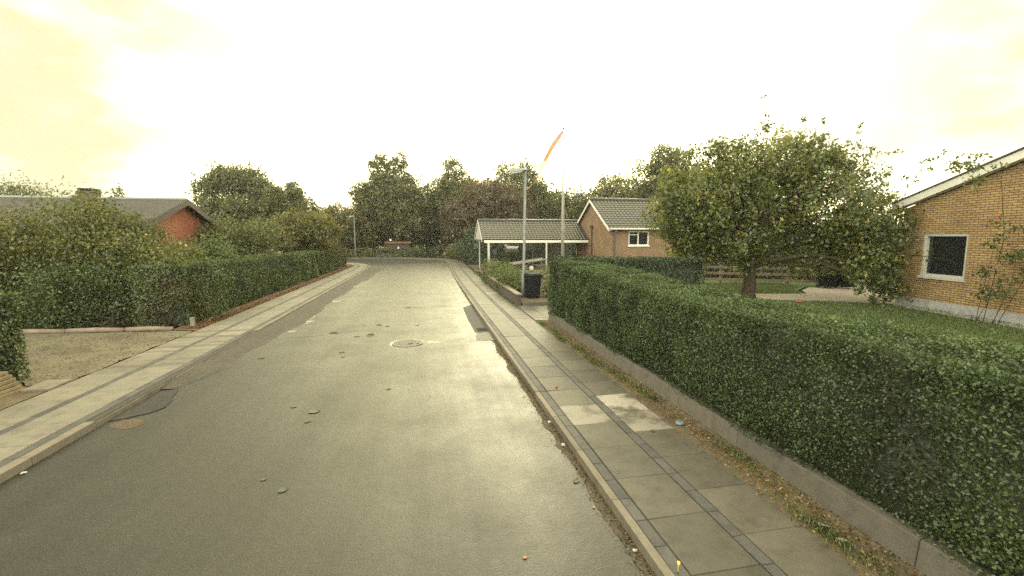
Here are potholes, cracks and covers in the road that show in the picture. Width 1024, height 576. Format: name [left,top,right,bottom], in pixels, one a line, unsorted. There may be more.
manhole cover [390,339,425,348]
